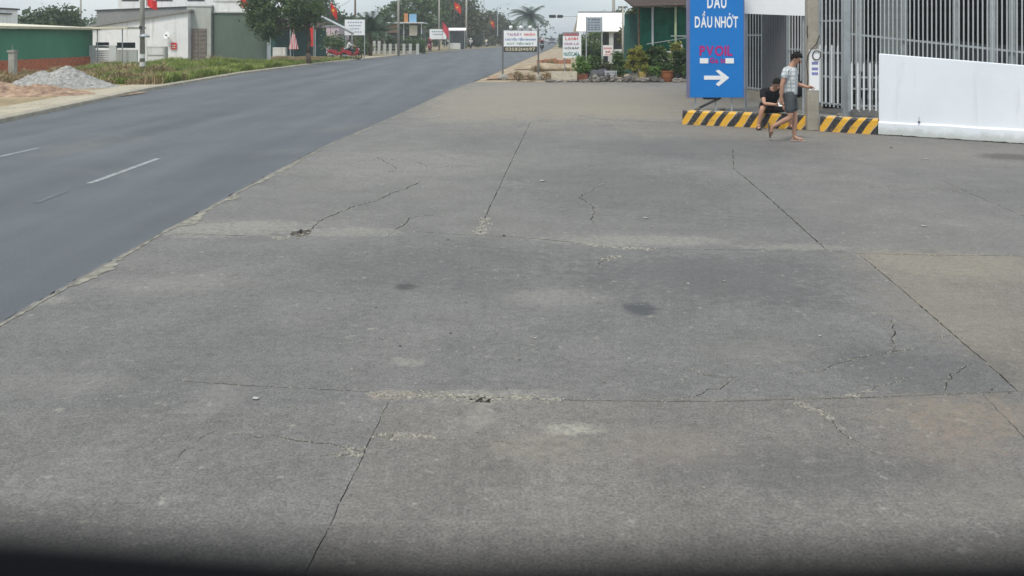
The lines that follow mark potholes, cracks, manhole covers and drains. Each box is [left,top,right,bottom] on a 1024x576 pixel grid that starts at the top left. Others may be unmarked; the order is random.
crack [789,320,954,374]
crack [793,378,908,454]
crack [944,362,974,392]
crack [172,430,455,462]
crack [311,149,486,235]
crack [676,368,735,401]
crack [578,181,609,223]
